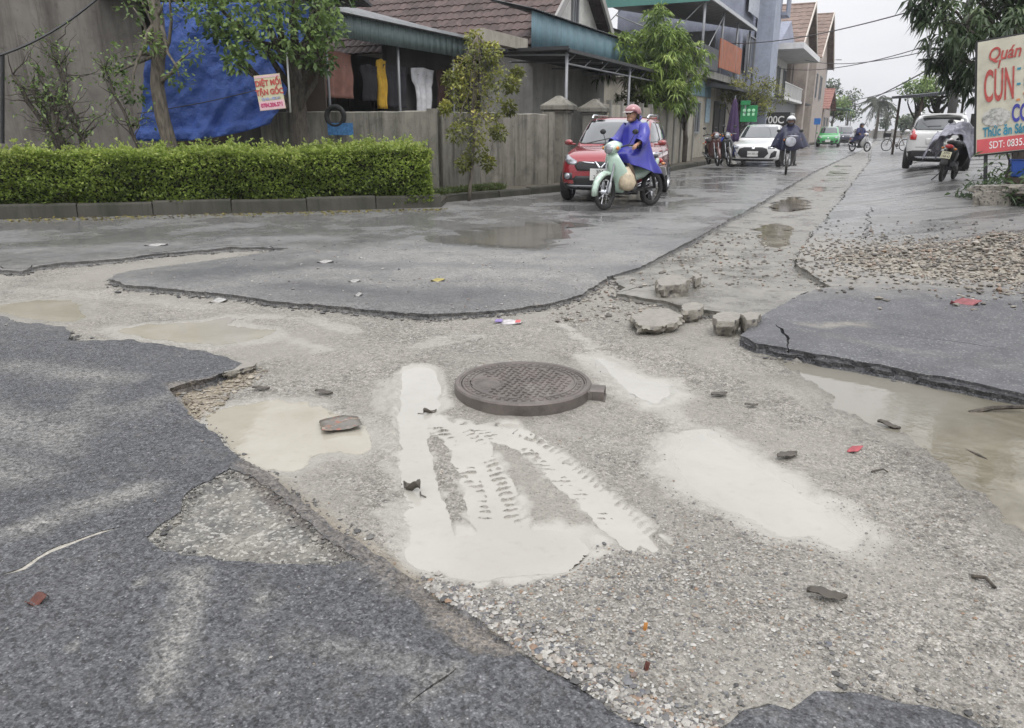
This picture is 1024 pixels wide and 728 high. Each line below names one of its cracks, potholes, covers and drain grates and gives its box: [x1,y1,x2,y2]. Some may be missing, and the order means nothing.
pothole [763,196,815,213]
pothole [759,353,1024,548]
pothole [190,396,374,478]
pothole [148,469,355,565]
manhole cover [454,361,607,417]
pothole [747,222,804,253]
